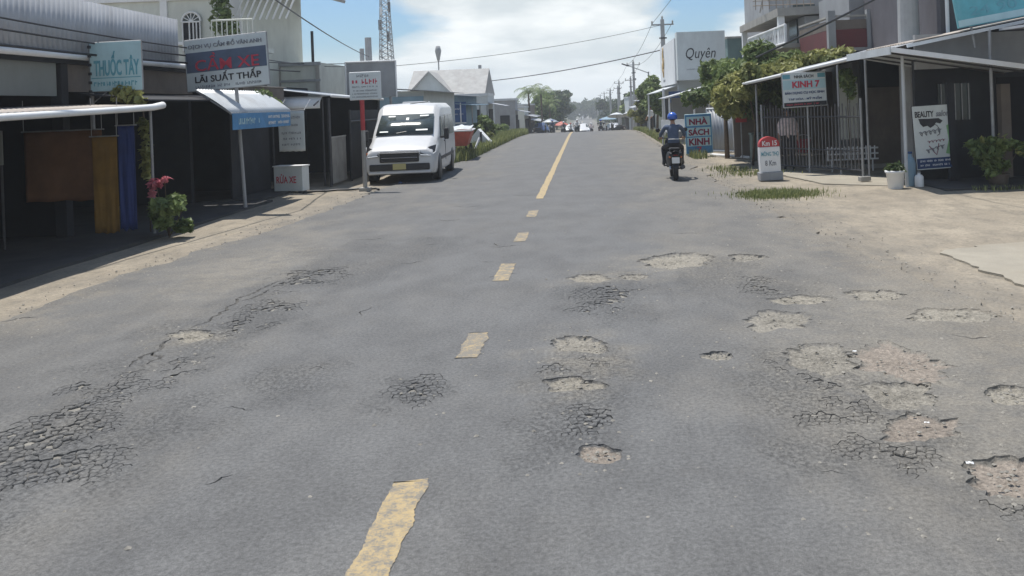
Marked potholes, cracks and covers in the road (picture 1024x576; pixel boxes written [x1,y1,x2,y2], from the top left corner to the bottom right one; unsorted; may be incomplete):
pothole [847,339,958,386]
crack [563,282,648,316]
pothole [843,289,907,301]
pothole [879,411,963,442]
crack [763,359,943,479]
pothole [984,385,1024,406]
pothole [636,252,714,270]
crack [561,403,614,436]
pothole [906,307,1004,323]
pothole [961,455,1024,498]
pothole [575,443,622,464]
pothole [766,294,838,305]
